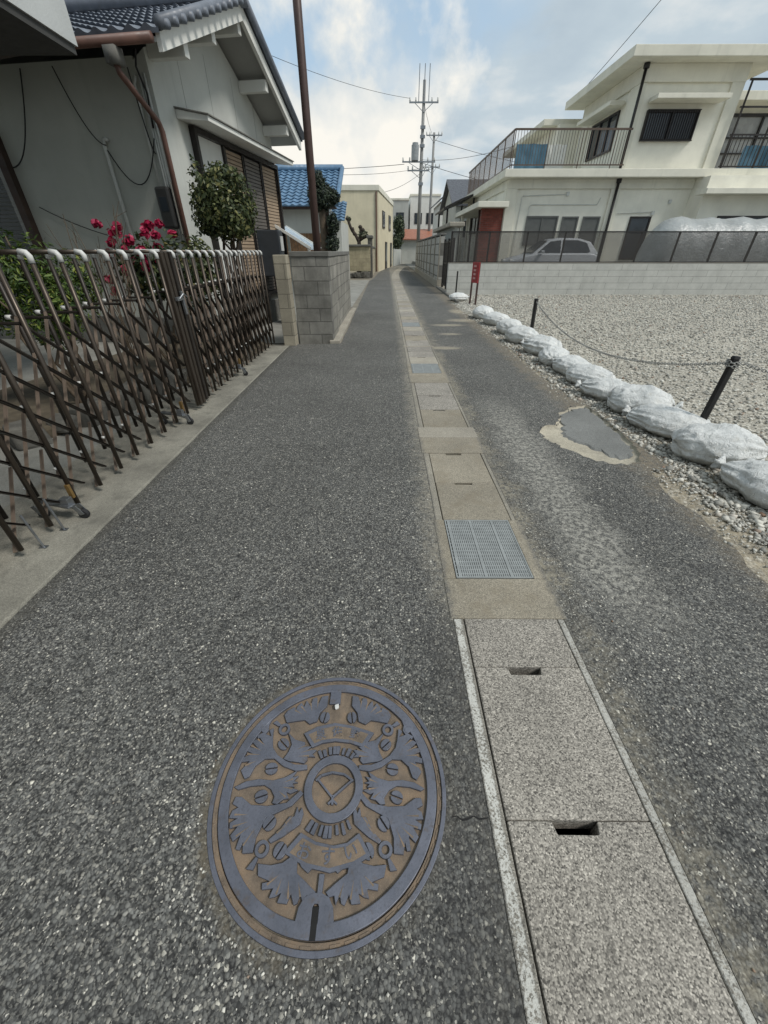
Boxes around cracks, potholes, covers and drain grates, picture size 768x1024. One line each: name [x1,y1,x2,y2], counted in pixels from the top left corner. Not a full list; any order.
drain grate [444,520,534,579]
manhole cover [207,677,446,959]
